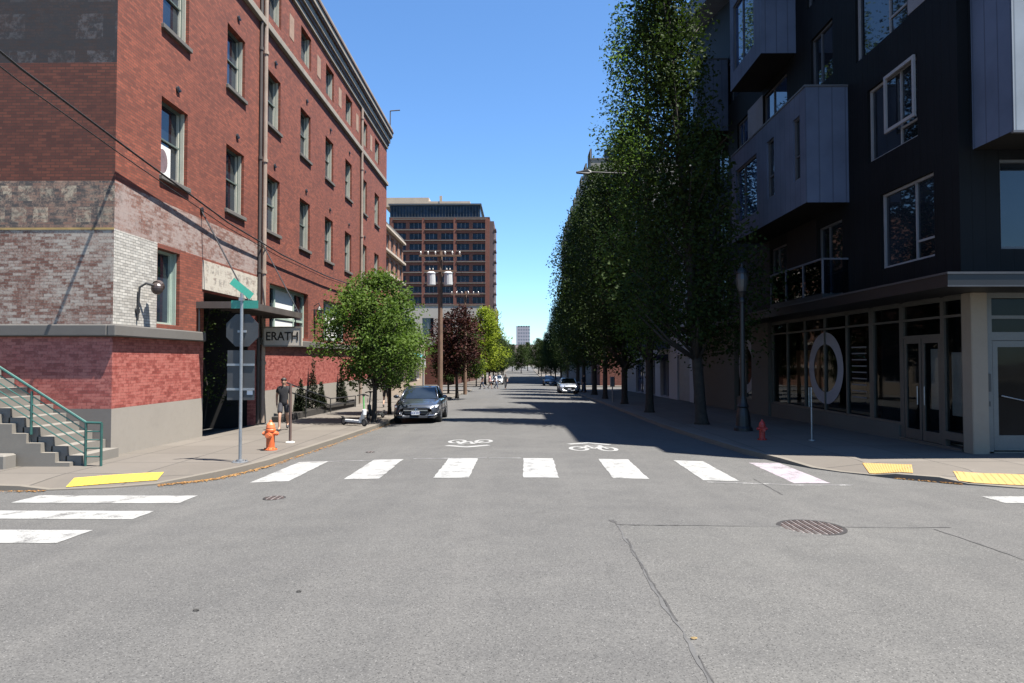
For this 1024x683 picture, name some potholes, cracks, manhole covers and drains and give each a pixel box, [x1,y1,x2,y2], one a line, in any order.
crack [609,520,780,683]
